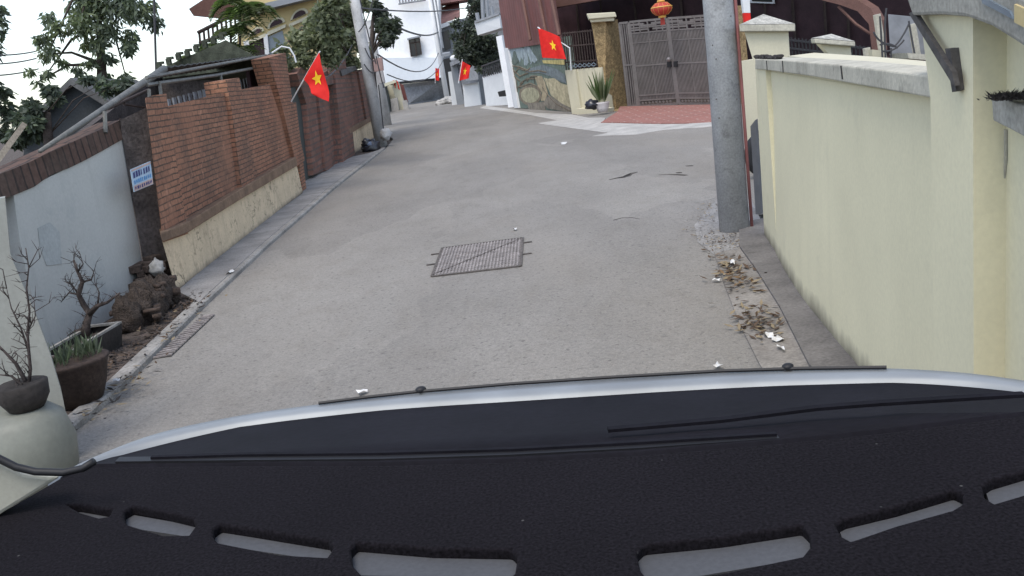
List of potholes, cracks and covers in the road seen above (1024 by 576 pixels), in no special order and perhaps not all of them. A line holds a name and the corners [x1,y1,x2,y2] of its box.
drain grate [153,314,215,359]
